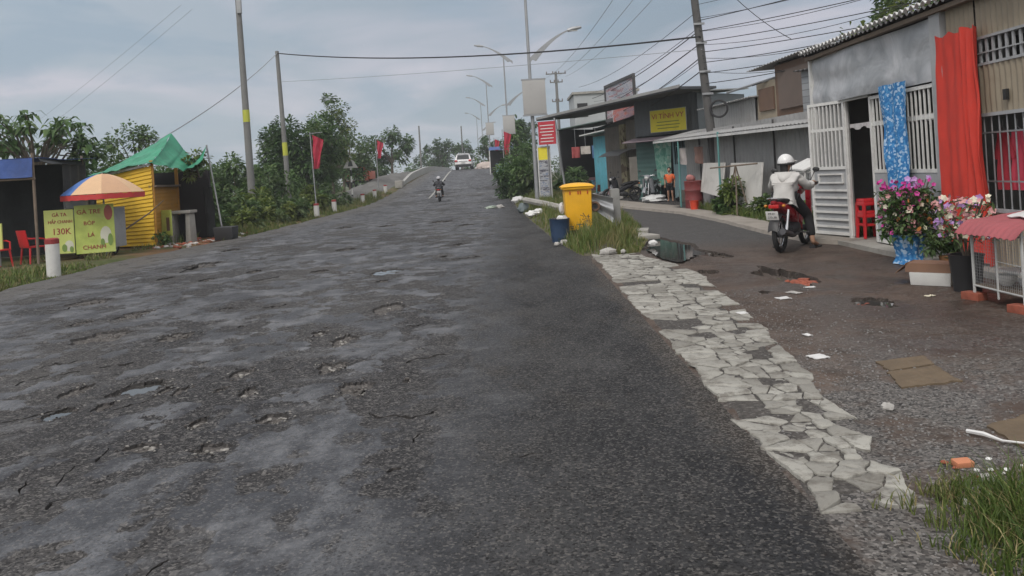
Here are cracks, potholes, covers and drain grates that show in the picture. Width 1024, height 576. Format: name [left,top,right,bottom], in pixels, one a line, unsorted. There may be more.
crack [369,408,443,443]
pothole [249,411,297,425]
pothole [371,301,408,315]
crack [45,448,109,510]
pothole [104,377,174,398]
pothole [333,377,376,397]
pothole [221,367,259,381]
pothole [232,385,261,401]
pothole [329,332,360,348]
pothole [184,415,209,430]
pothole [115,440,166,453]
pothole [751,265,822,286]
